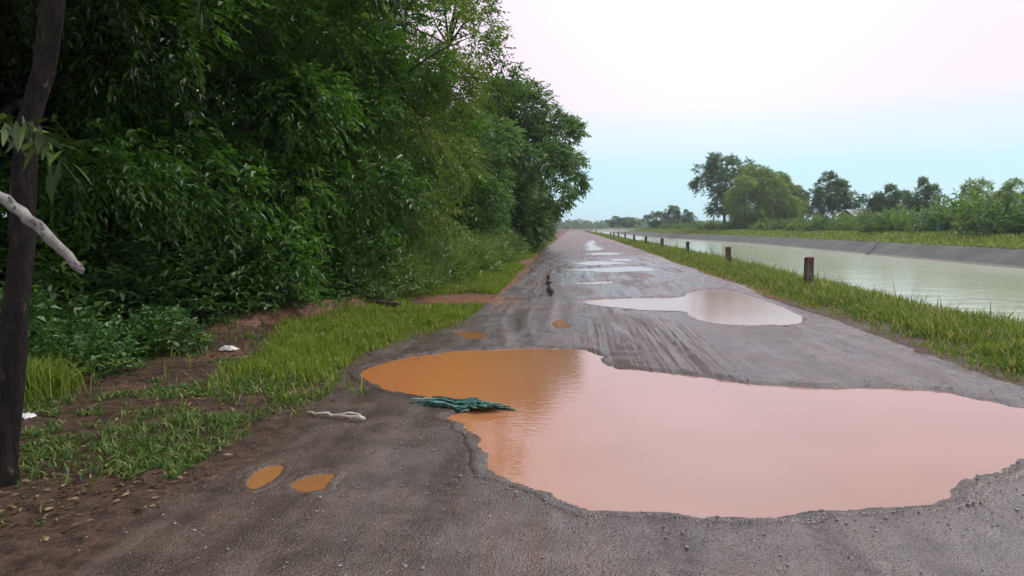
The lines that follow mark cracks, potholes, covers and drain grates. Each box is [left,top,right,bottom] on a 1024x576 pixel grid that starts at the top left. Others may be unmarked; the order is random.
pothole [237,462,294,493]
crack [531,264,568,297]
pothole [546,319,574,329]
pothole [575,288,816,327]
pothole [451,330,490,340]
pothole [584,240,605,251]
pothole [280,470,346,495]
pothole [346,345,1024,524]
